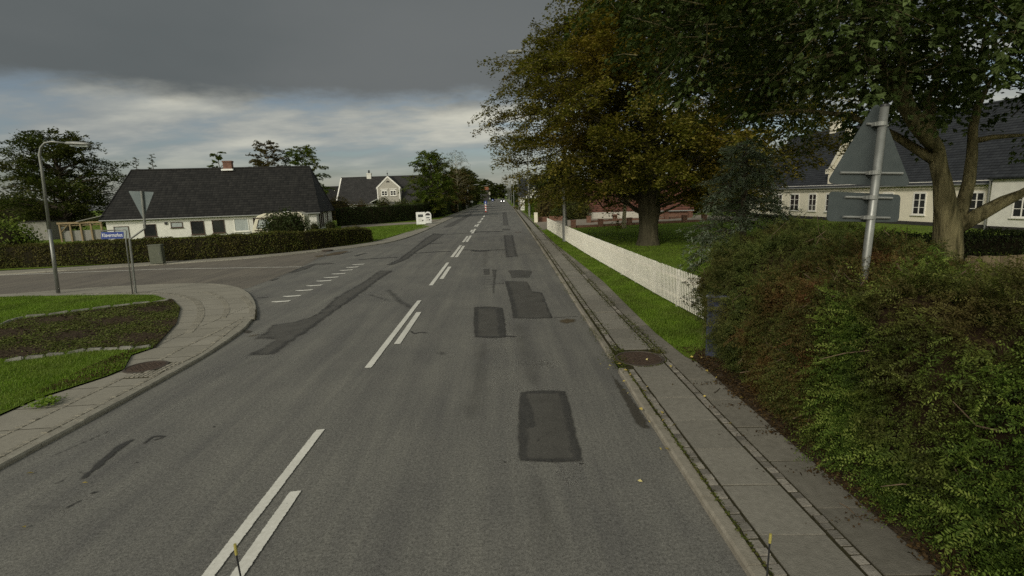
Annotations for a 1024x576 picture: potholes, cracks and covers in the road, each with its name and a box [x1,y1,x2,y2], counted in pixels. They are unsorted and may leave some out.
manhole cover [615,351,665,366]
manhole cover [122,360,169,374]
